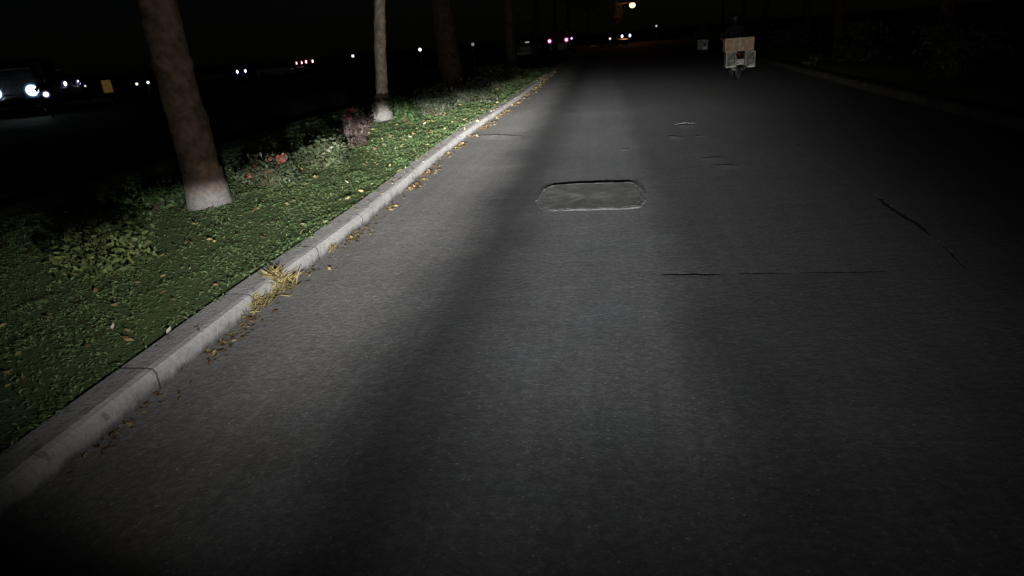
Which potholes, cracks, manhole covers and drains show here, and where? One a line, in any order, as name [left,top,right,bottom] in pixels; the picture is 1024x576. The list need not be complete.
crack [783,140,964,266]
crack [656,271,920,307]
